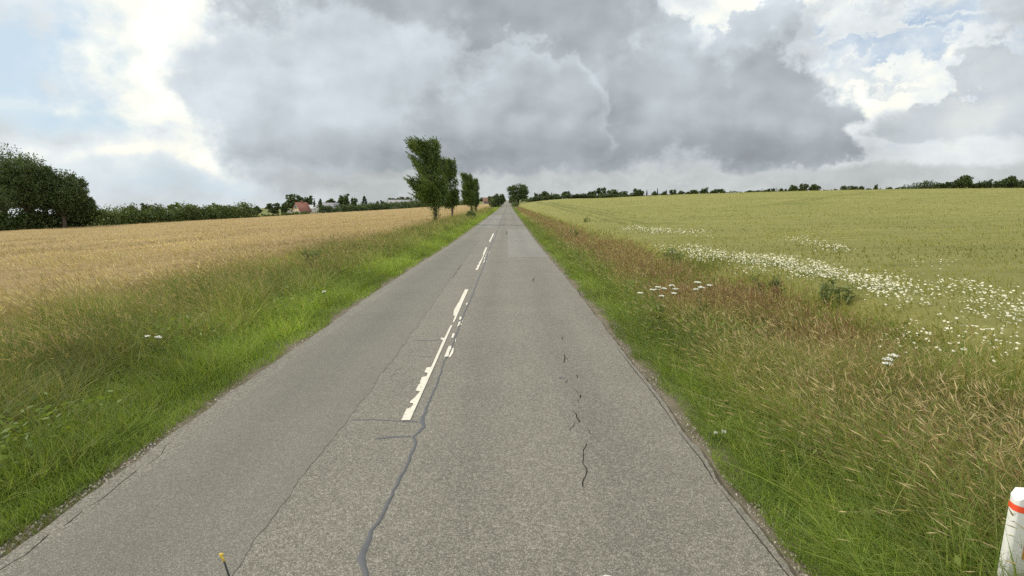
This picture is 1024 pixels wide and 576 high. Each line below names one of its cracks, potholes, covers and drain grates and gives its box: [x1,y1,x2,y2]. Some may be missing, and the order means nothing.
crack [65,442,170,525]
crack [562,337,605,489]
